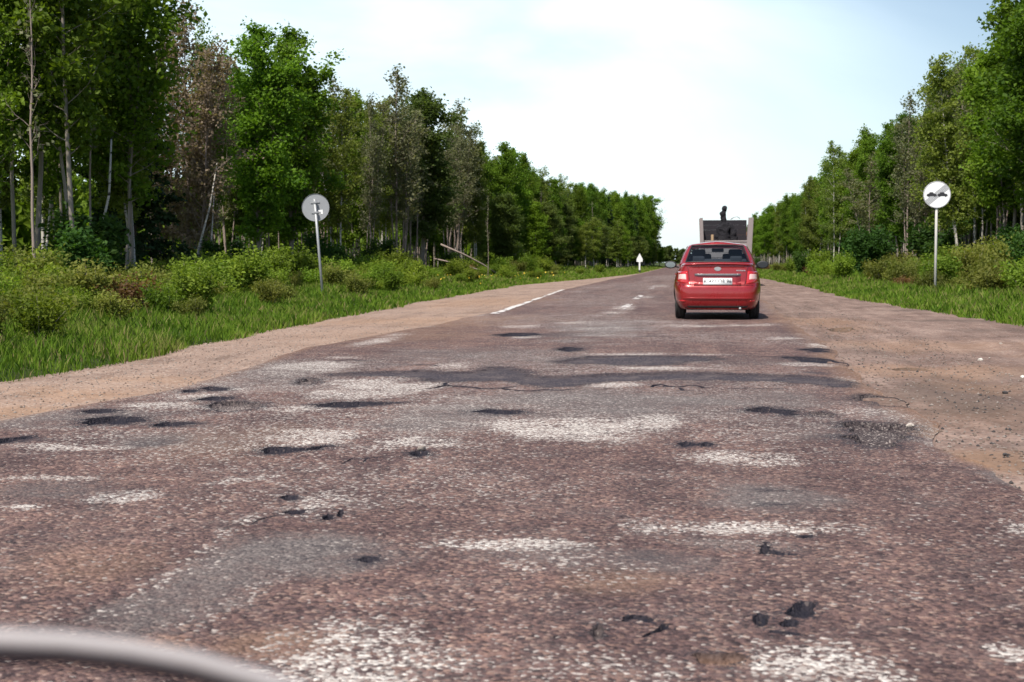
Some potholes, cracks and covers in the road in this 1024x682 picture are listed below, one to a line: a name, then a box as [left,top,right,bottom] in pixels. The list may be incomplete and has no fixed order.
pothole [839,421,915,447]
crack [420,364,570,391]
pothole [82,416,146,426]
pothole [752,613,770,627]
pothole [759,542,798,556]
pothole [262,445,331,454]
pothole [782,356,849,366]
pothole [746,407,799,416]
pothole [784,601,816,619]
pothole [779,619,800,627]
